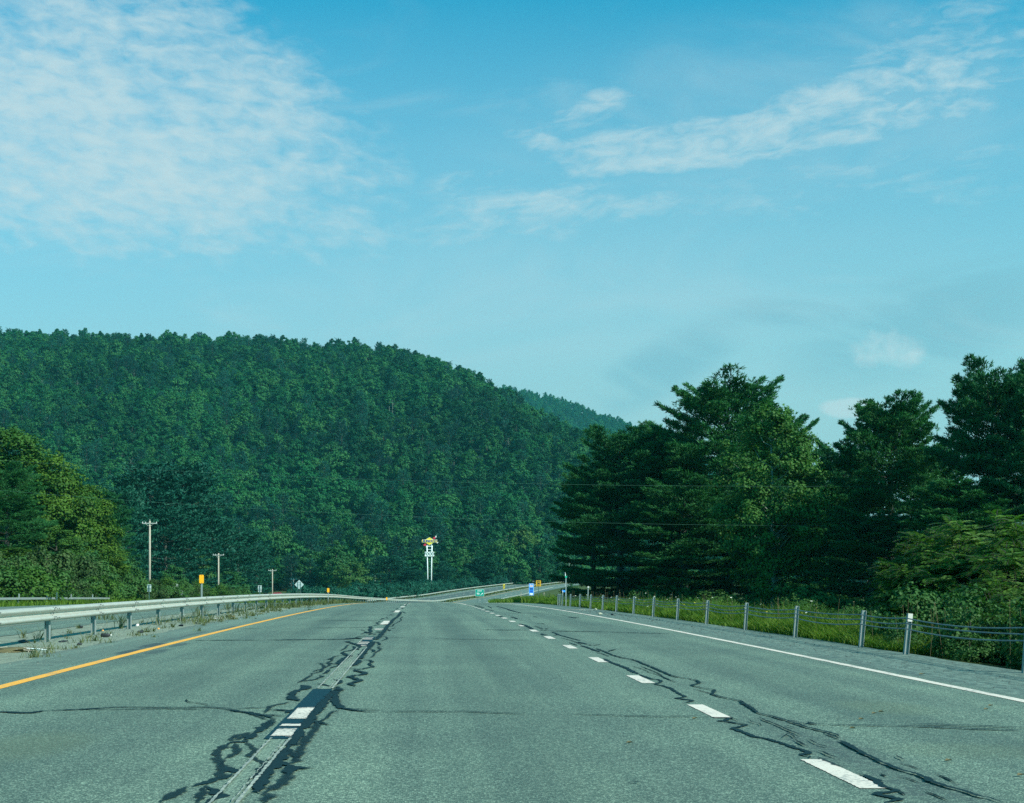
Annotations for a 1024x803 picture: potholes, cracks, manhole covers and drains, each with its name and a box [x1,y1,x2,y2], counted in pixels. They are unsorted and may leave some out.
crack [564,638,957,800]
